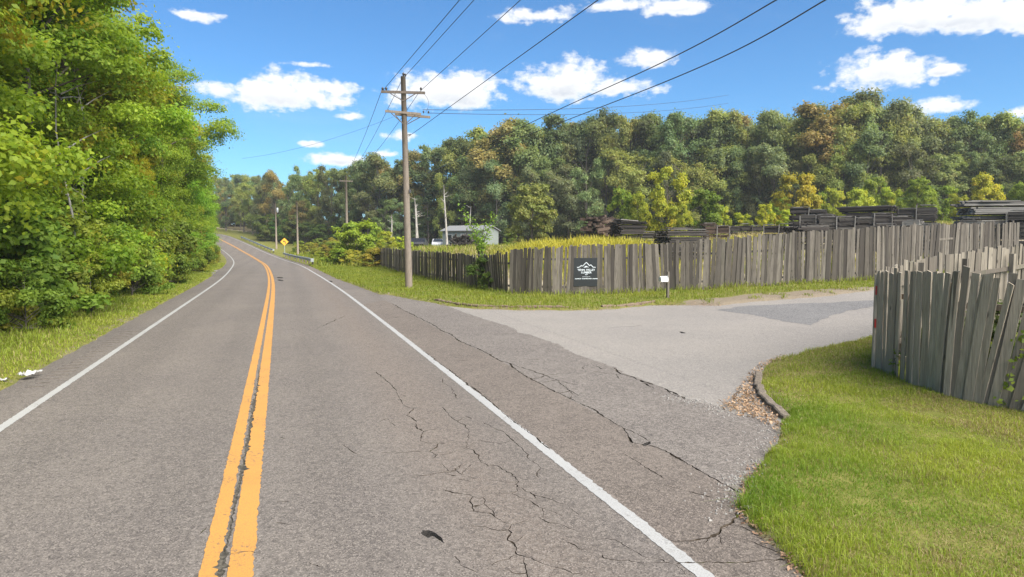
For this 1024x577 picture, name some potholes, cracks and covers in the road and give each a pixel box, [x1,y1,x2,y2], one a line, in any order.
crack [376,372,583,577]
